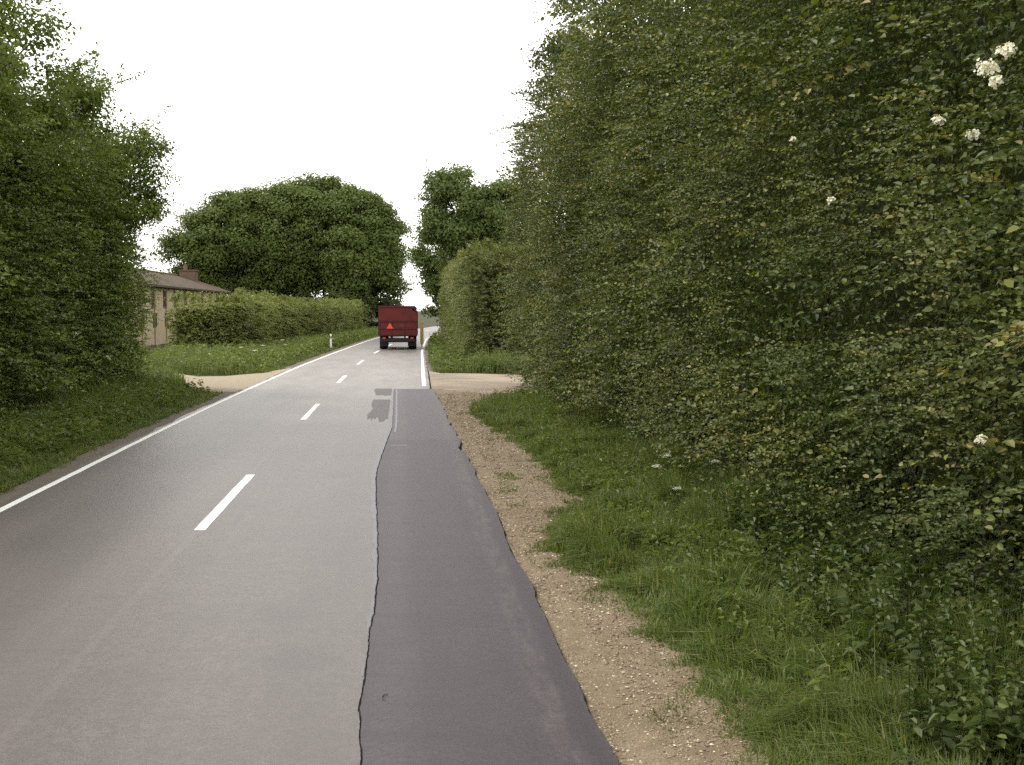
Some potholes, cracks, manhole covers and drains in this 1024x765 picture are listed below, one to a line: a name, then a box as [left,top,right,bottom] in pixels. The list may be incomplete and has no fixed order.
crack [358,389,407,765]
